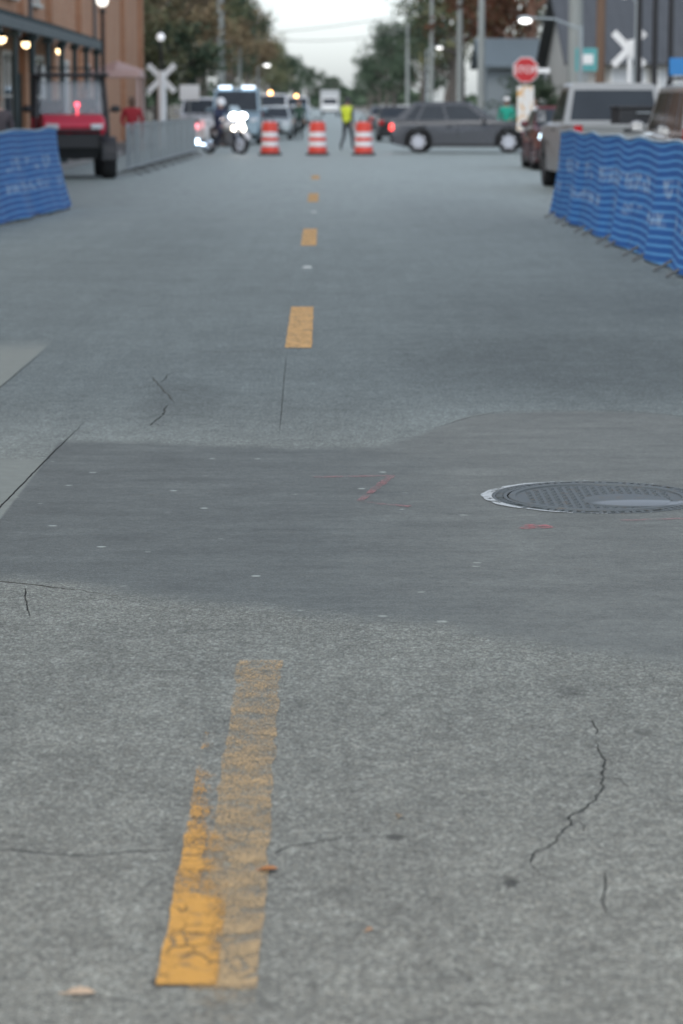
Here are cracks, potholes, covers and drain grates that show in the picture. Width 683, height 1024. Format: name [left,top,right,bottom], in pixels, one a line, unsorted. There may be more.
crack [0,849,167,857]
crack [274,838,337,854]
manhole cover [481,480,683,514]
crack [529,720,628,874]
crack [140,372,209,426]
crack [0,581,105,616]
